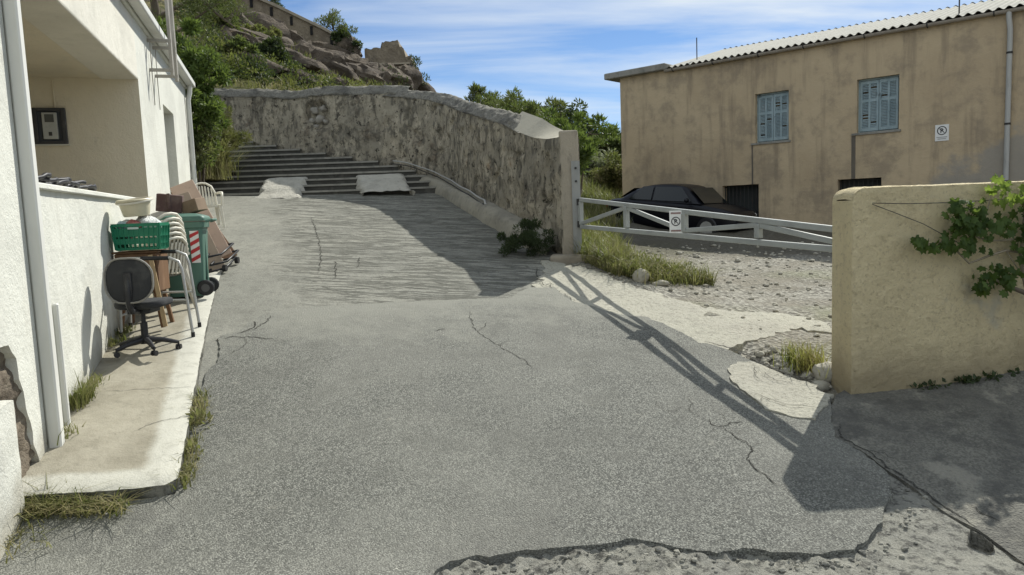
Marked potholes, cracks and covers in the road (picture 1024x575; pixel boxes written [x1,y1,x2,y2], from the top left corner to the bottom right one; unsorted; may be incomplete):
crack [654,398,783,488]
crack [838,426,1000,526]
crack [227,316,284,352]
